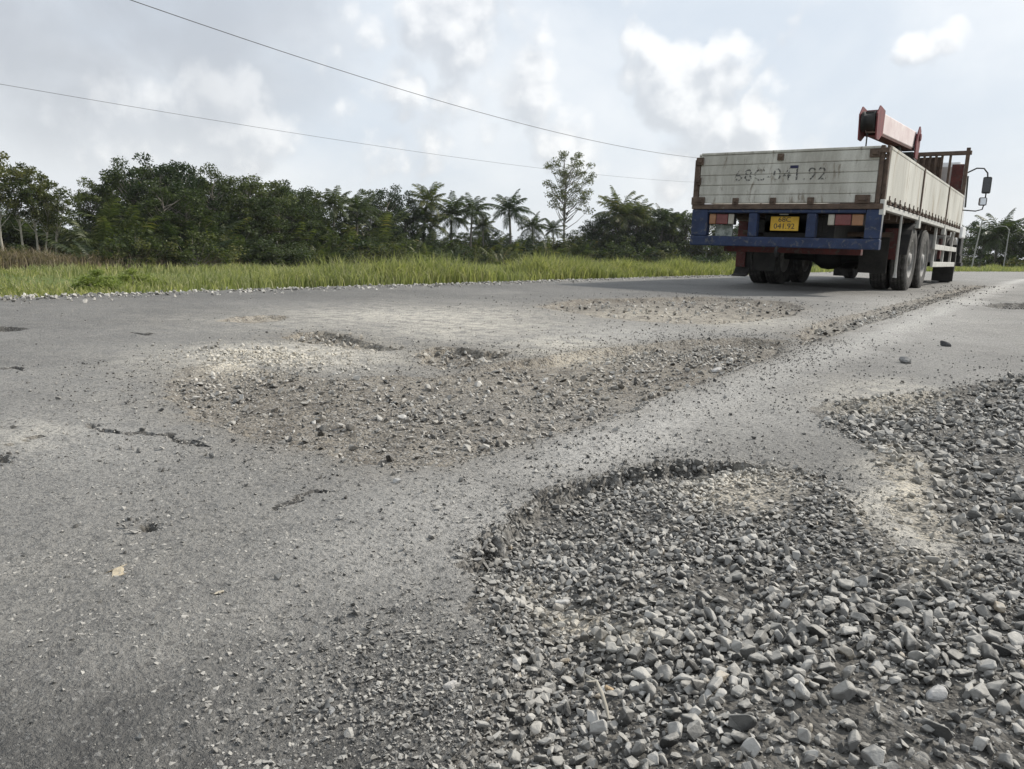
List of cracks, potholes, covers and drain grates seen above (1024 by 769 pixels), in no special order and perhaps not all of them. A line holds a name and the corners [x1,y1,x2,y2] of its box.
crack [86,423,210,447]
pothole [451,455,1024,769]
pothole [537,296,805,324]
pothole [150,337,792,471]
pothole [799,372,1024,558]
crack [272,489,330,511]
pothole [282,330,404,351]
